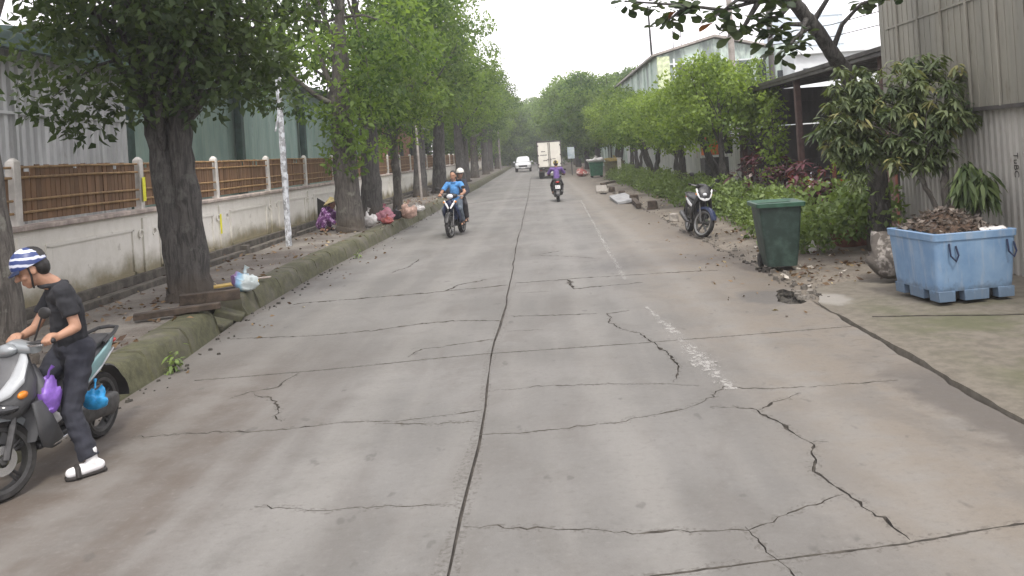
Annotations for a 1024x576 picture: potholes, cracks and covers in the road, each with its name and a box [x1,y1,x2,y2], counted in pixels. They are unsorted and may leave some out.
crack [294,270,717,305]
pothole [776,289,807,304]
crack [137,310,910,576]
